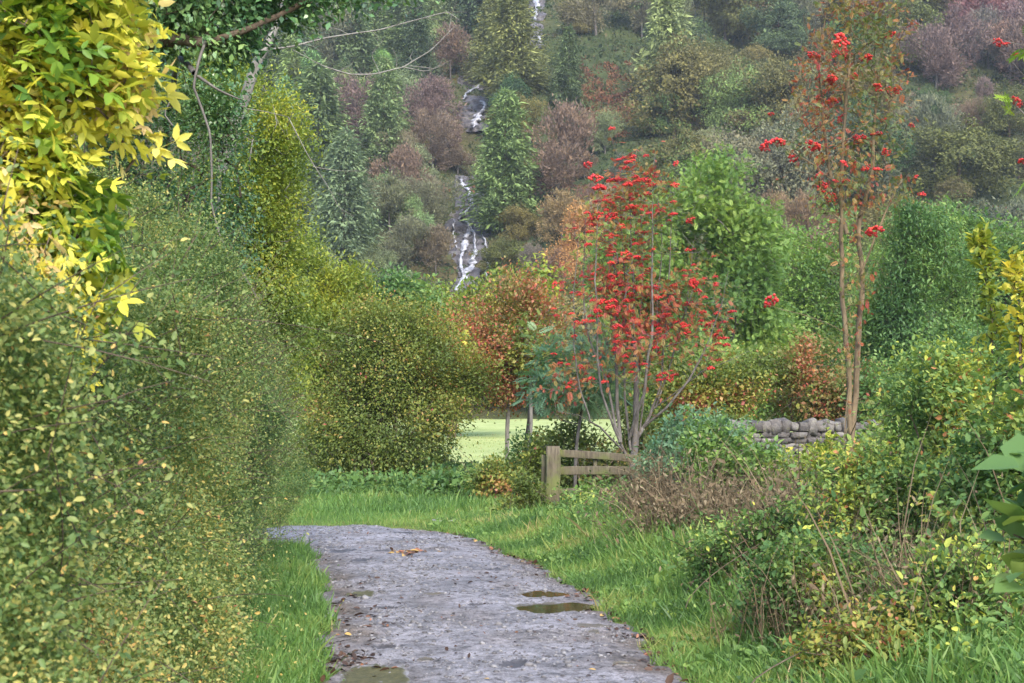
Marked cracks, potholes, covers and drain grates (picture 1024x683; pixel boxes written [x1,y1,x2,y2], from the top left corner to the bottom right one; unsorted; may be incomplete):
pothole [338,663,411,683]
pothole [513,590,572,598]
pothole [507,601,596,614]
